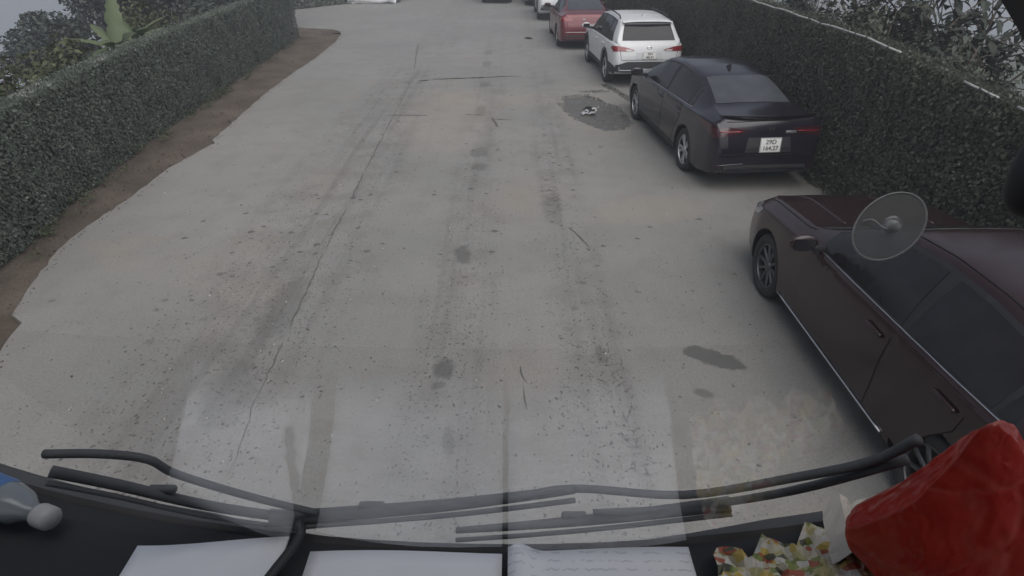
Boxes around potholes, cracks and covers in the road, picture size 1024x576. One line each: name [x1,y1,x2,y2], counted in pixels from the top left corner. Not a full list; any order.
pothole [558,94,633,131]
crack [230,45,505,468]
